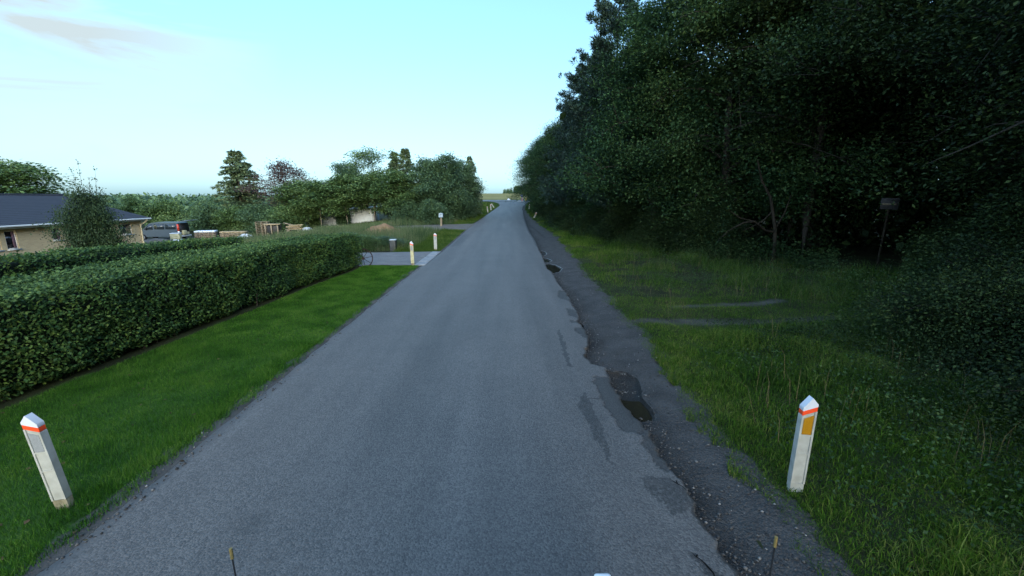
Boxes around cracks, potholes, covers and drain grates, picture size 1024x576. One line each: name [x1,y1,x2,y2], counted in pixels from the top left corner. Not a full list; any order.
pothole [606,369,657,423]
